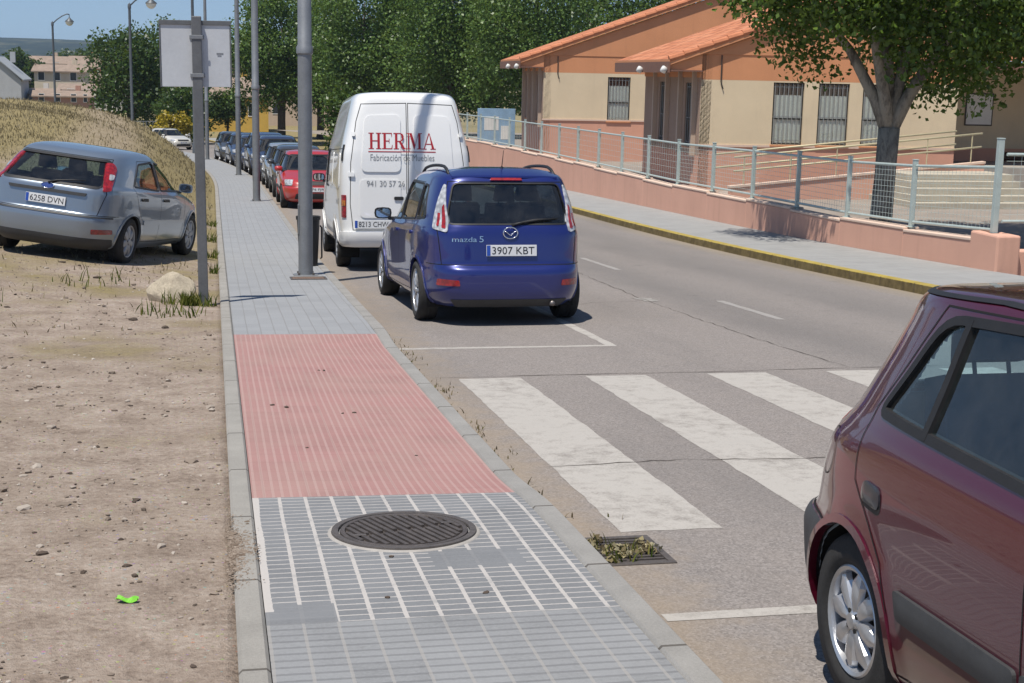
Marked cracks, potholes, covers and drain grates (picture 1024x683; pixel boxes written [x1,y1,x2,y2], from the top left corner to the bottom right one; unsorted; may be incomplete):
manhole cover [327,511,480,553]
drain grate [585,535,677,567]
